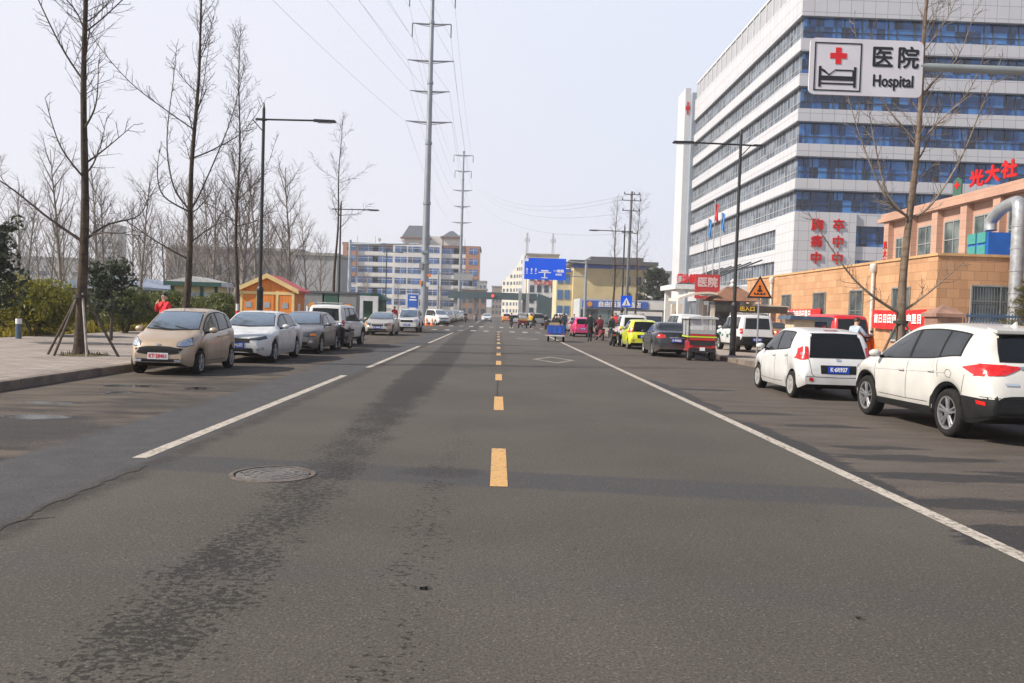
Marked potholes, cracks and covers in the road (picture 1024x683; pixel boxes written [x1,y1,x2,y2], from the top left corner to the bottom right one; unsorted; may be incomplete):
crack [0,466,145,530]
manhole cover [229,466,316,483]
